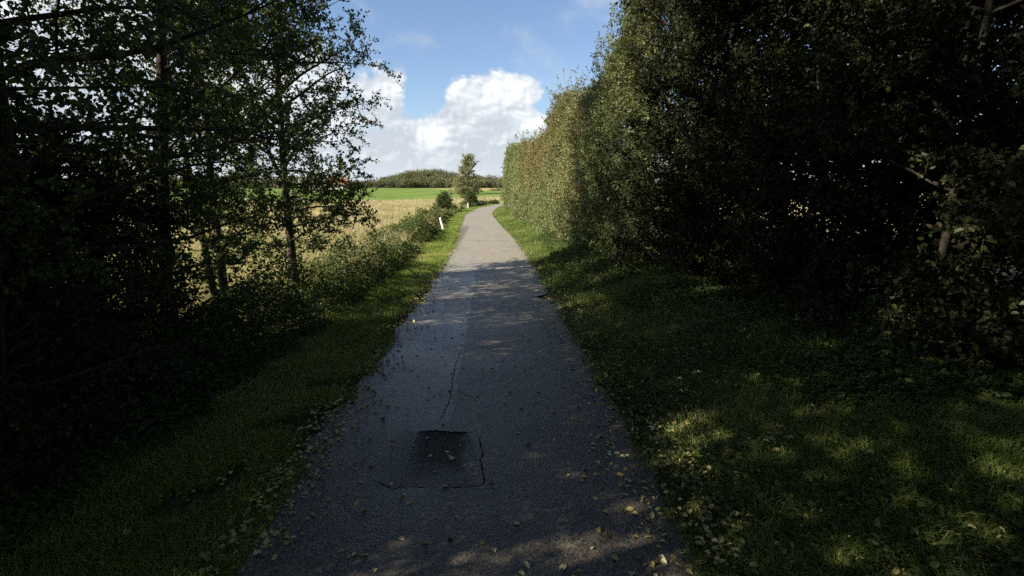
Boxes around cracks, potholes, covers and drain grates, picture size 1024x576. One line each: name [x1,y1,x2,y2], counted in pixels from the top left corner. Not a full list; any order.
crack [376,349,485,489]
pothole [405,430,473,483]
